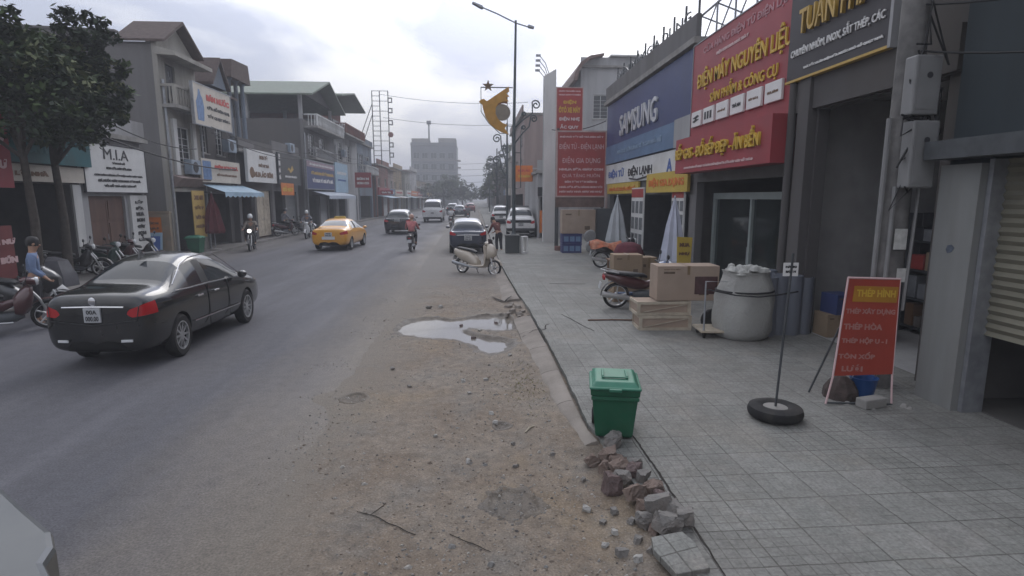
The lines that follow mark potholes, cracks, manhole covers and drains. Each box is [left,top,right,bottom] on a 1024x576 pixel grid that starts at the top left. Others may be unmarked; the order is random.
pothole [391,313,523,356]
